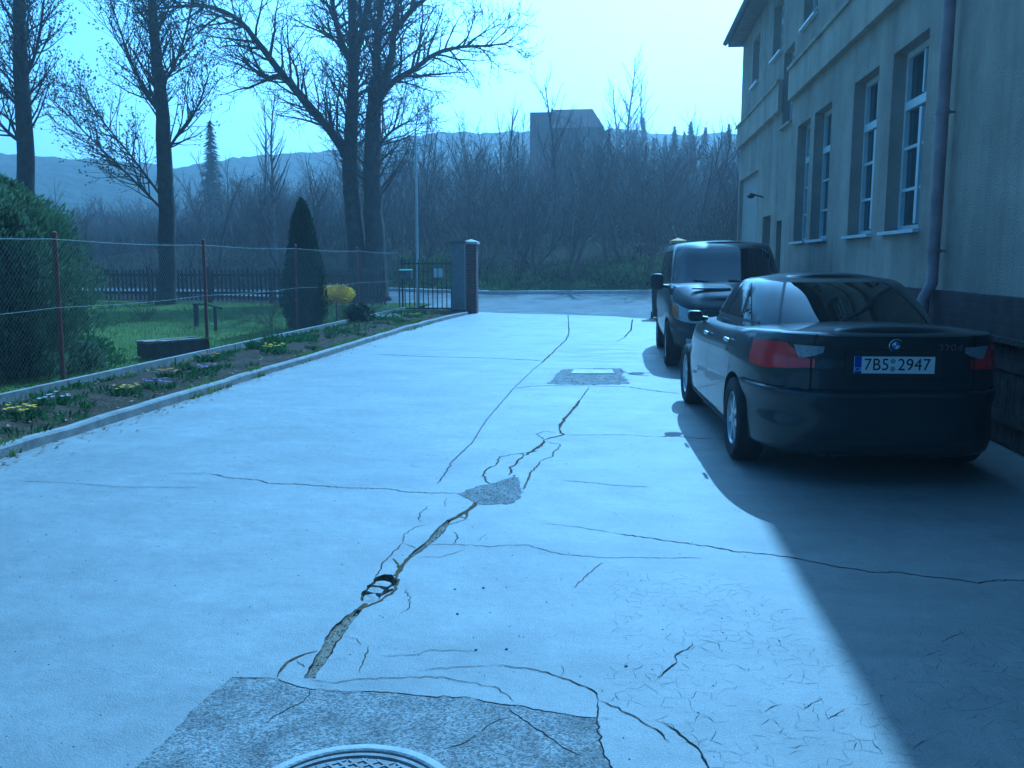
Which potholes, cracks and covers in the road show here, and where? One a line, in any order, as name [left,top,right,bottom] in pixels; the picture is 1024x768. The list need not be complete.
manhole cover [273,744,446,768]
crack [171,473,1024,768]
pothole [360,574,398,604]
